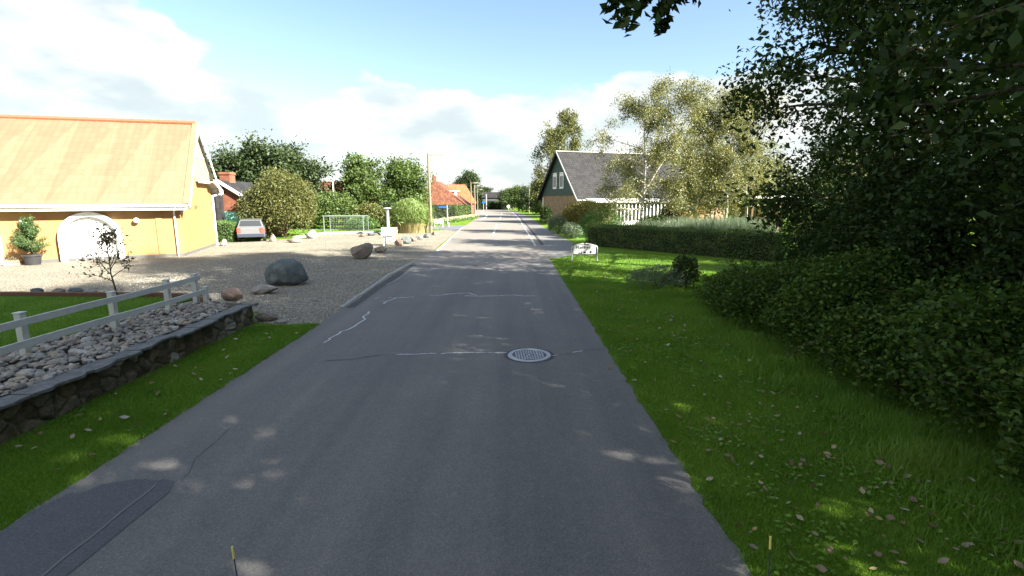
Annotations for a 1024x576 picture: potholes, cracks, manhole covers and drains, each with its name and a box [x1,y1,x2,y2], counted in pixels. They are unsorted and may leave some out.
manhole cover [504,348,554,363]
crack [324,293,594,361]
